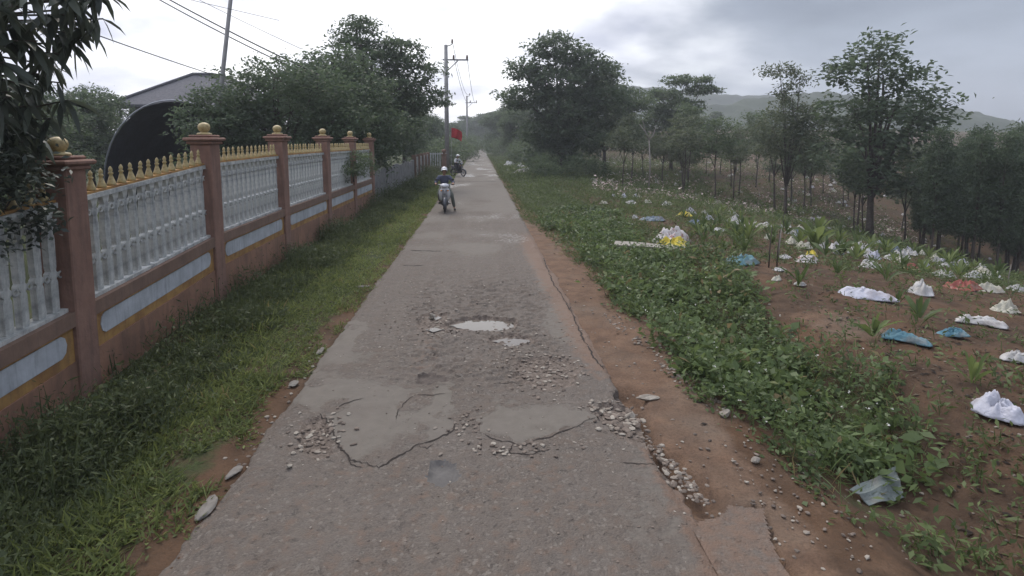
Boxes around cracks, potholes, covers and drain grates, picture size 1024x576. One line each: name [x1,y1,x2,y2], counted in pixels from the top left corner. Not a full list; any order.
pothole [511,355,582,392]
pothole [486,332,538,347]
pothole [447,314,521,331]
pothole [594,402,647,449]
crack [320,398,455,468]
crack [543,258,604,369]
crack [485,418,593,455]
